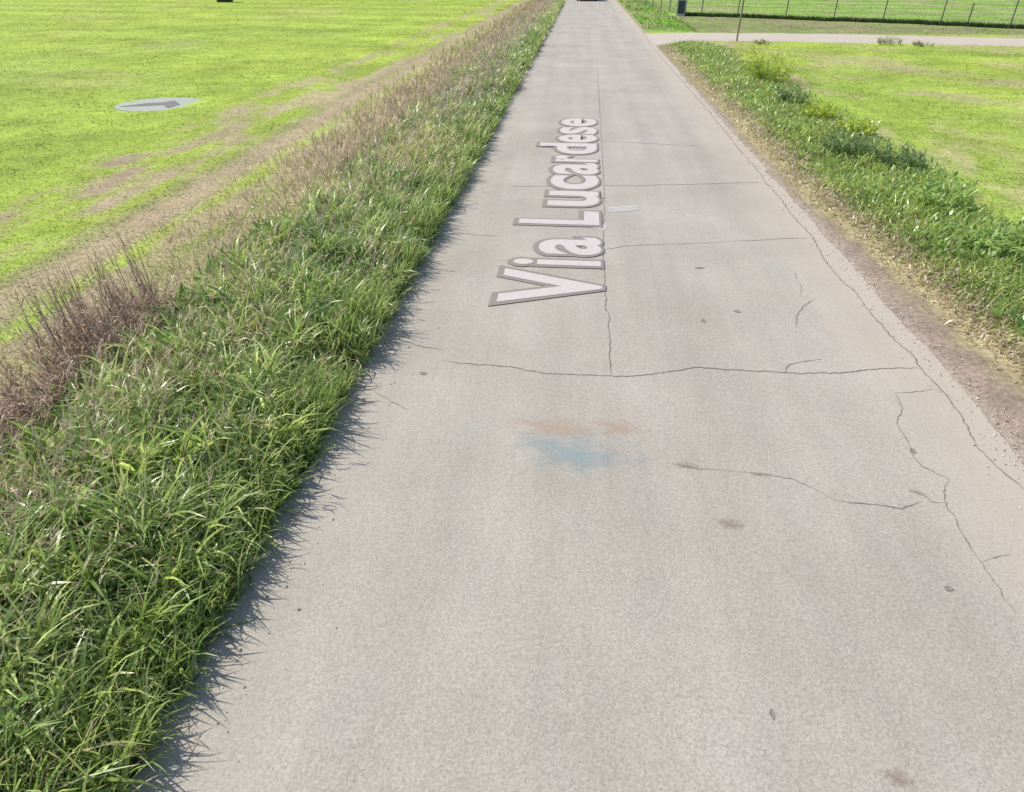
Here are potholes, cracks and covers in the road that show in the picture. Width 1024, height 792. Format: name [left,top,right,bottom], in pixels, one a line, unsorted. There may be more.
crack [455,13,1023,613]
